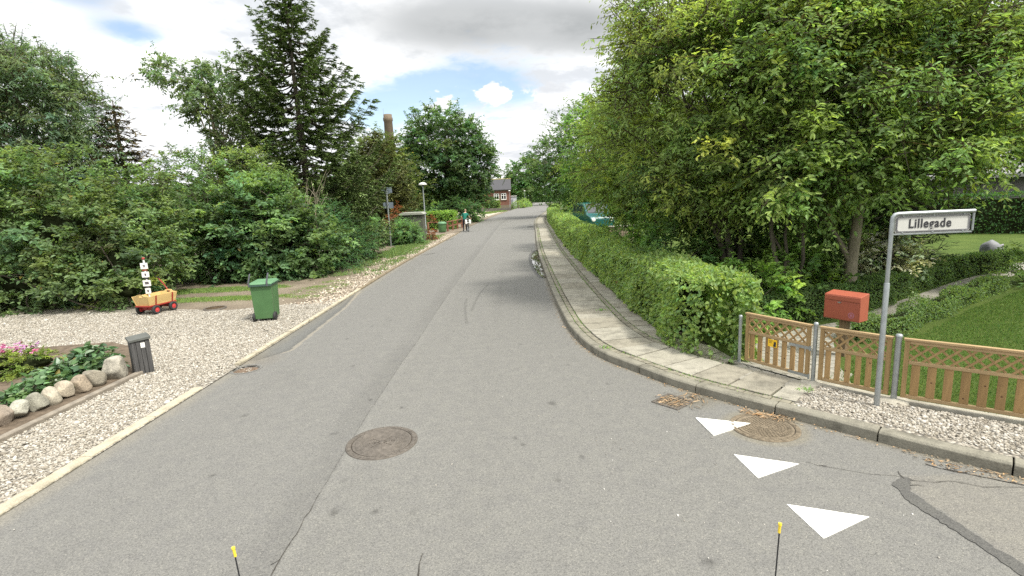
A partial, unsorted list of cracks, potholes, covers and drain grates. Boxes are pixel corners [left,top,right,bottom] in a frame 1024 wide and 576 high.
drain grate [651,393,693,411]
manhole cover [730,413,801,442]
manhole cover [229,364,263,374]
manhole cover [345,426,418,460]
